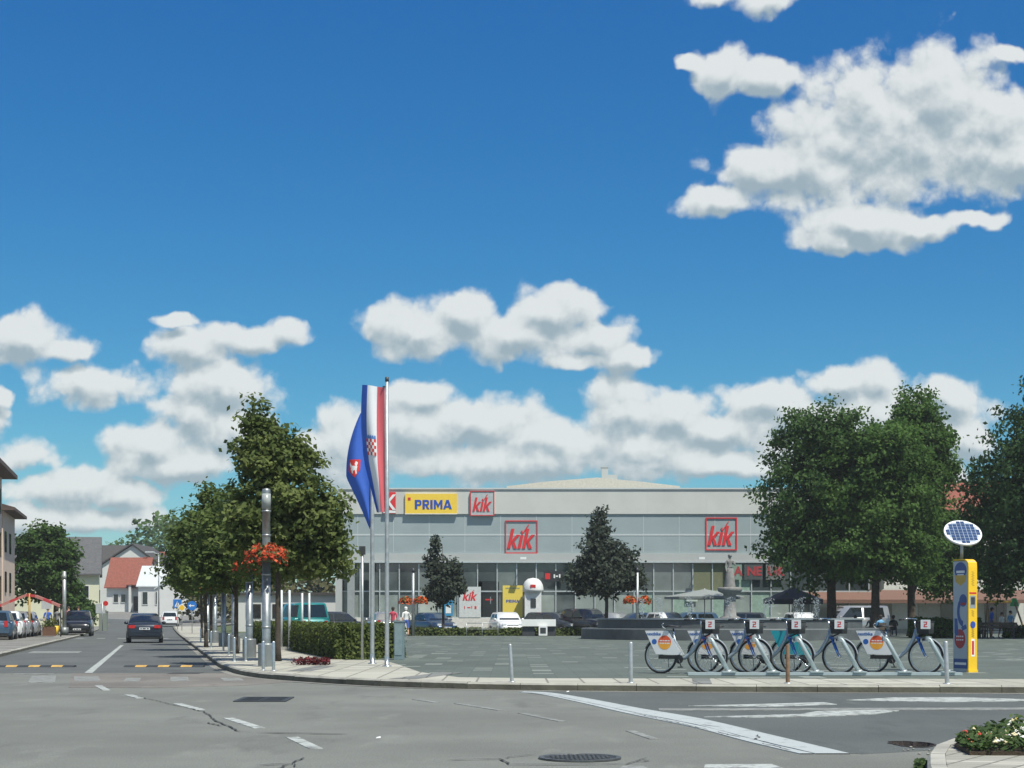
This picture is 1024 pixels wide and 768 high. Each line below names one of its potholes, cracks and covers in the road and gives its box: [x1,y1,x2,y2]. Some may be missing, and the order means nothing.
manhole cover [539,753,621,762]
crack [138,696,348,734]
